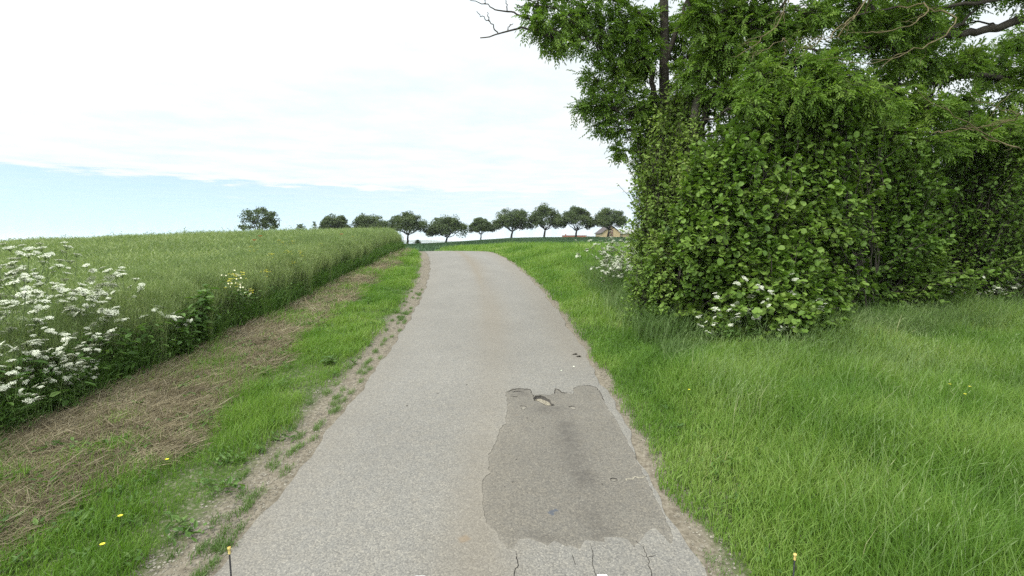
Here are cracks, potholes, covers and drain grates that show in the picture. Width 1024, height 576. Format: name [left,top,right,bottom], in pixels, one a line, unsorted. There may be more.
pothole [533,395,554,406]
